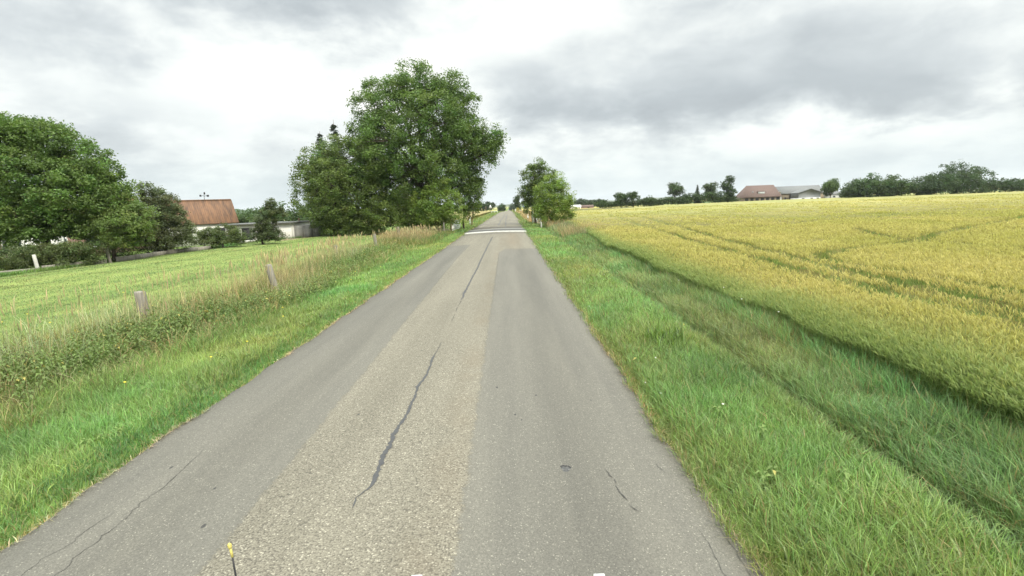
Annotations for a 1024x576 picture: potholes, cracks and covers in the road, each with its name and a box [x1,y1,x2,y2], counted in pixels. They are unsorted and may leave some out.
crack [21,451,202,576]
